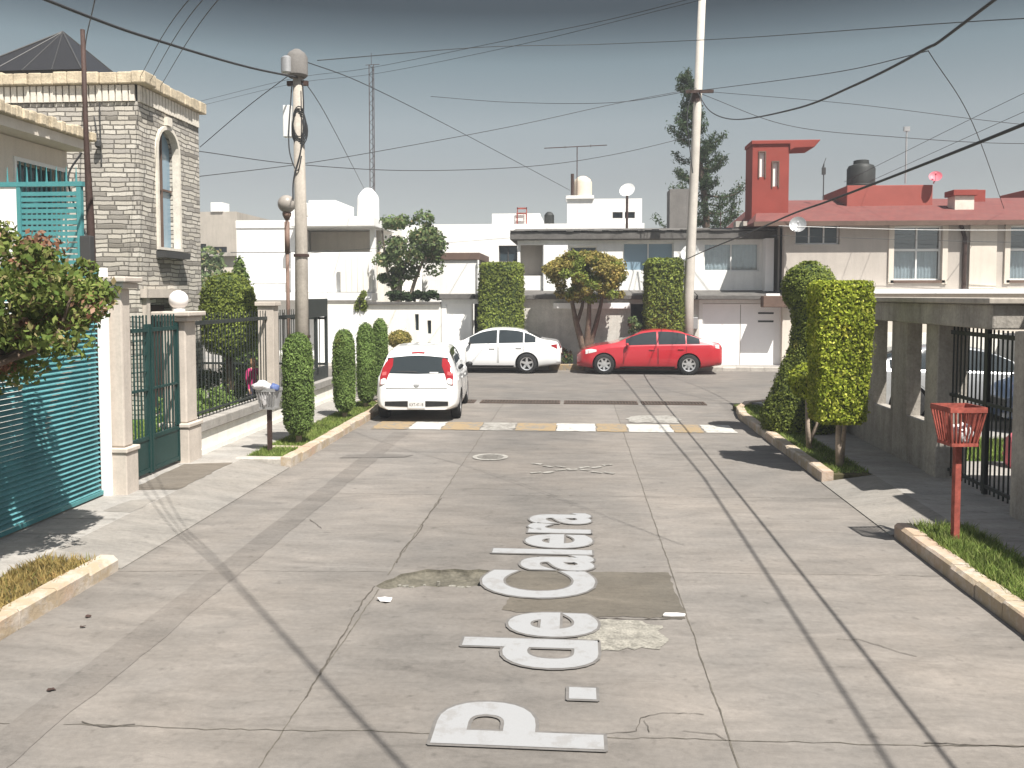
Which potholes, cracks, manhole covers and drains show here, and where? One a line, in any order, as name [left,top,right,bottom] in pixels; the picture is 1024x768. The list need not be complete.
crack [605,712,726,740]
pothole [377,569,490,589]
crack [305,586,375,697]
